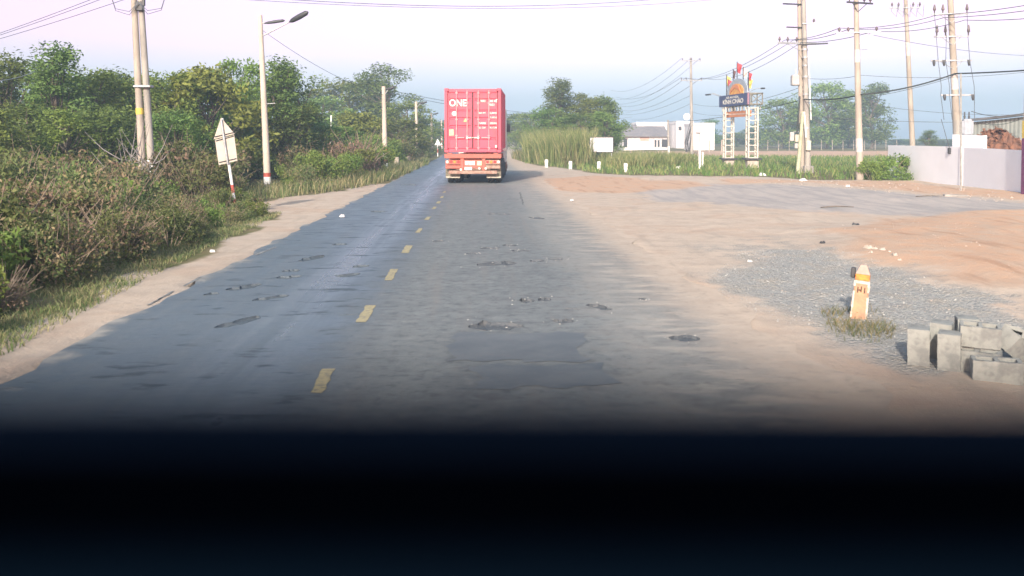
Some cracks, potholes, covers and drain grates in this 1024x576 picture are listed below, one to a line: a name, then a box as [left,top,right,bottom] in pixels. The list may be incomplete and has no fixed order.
pothole [214,315,261,328]
pothole [468,320,525,331]
